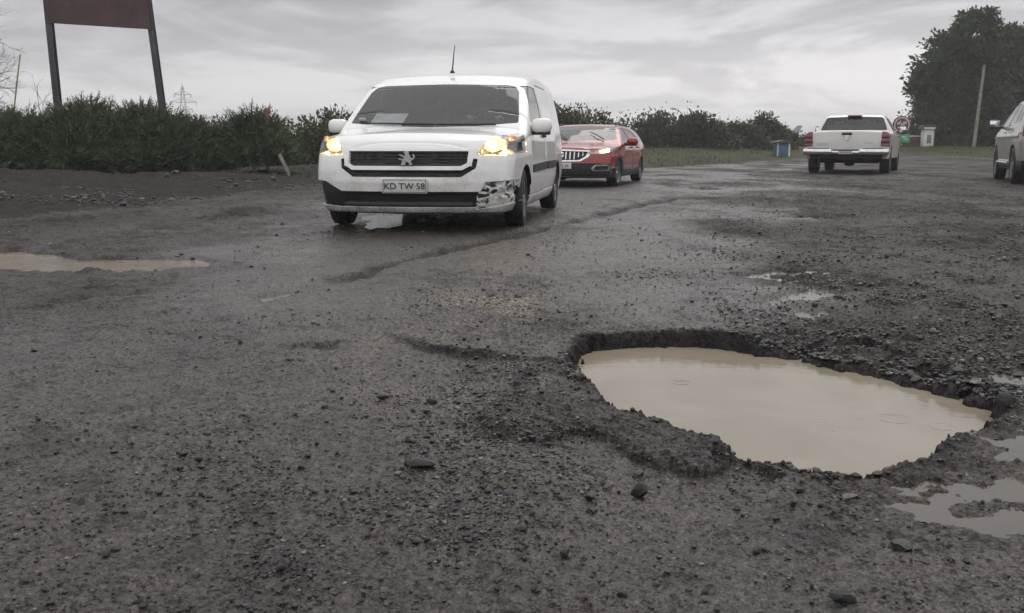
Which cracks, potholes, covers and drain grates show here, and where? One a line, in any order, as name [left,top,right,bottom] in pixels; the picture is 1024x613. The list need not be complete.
pothole [875,363,1024,542]
pothole [478,329,1012,480]
pothole [752,285,857,305]
pothole [0,245,219,272]
pothole [735,270,807,281]
crack [177,196,690,285]
pothole [780,301,834,322]
